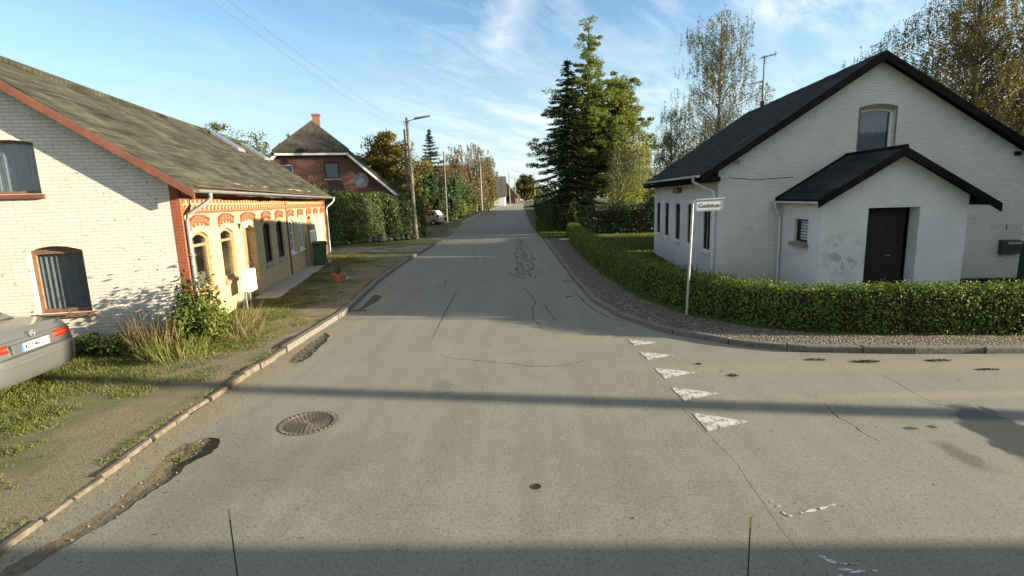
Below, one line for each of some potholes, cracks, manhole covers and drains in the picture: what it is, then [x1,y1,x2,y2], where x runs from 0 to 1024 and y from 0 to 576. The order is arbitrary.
pothole [359,295,382,310]
crack [510,238,554,332]
crack [432,281,606,367]
pothole [0,437,220,576]
manhole cover [276,411,339,436]
pothole [288,332,330,363]
